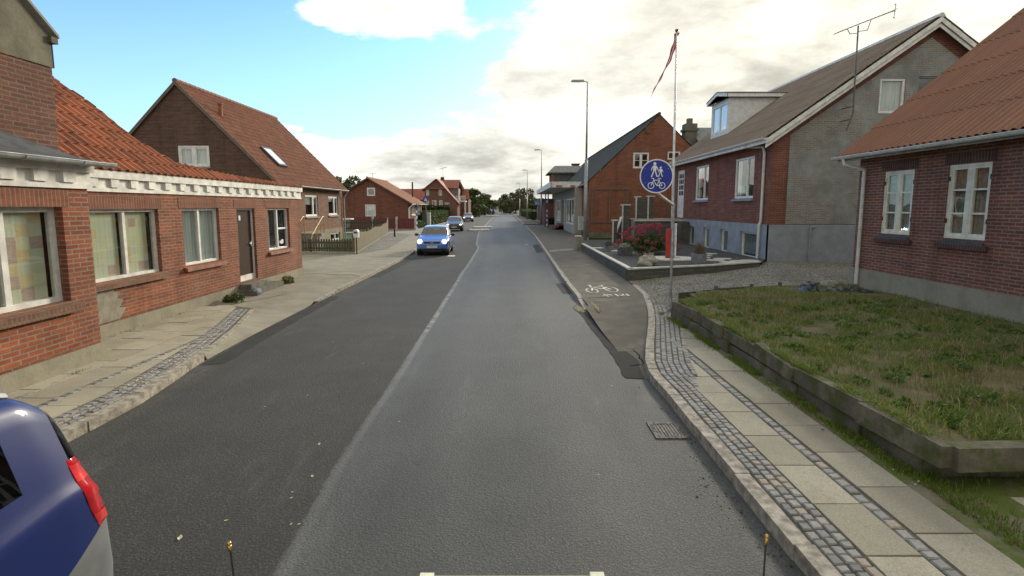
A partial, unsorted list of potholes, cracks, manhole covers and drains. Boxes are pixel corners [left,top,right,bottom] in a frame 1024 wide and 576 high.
drain grate [646,422,691,439]
